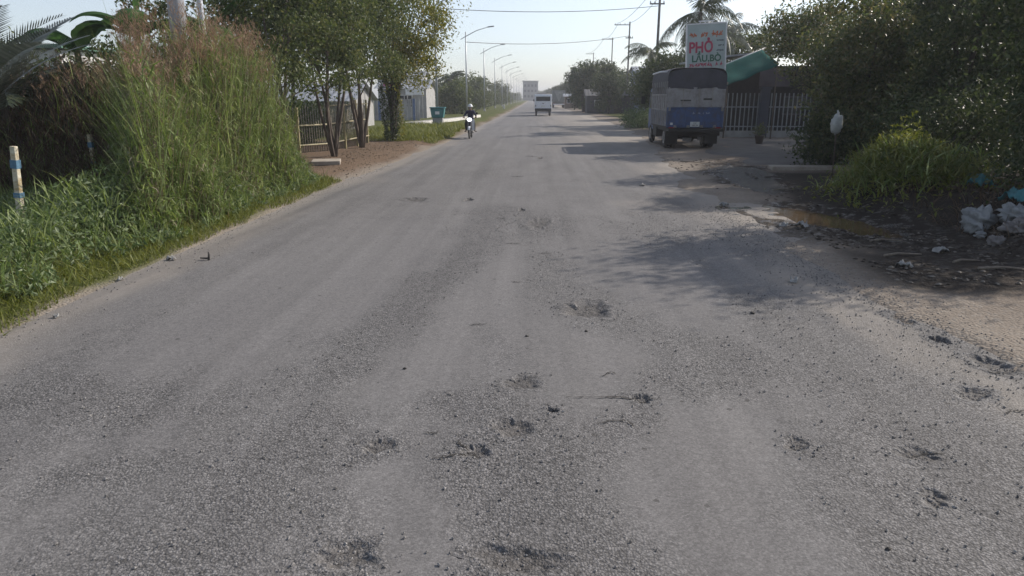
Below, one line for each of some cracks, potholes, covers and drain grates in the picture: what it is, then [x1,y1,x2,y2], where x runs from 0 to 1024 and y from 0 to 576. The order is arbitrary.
pothole [621,391,660,409]
pothole [918,333,960,347]
pothole [476,412,547,444]
pothole [351,434,408,460]
pothole [450,439,501,464]
pothole [450,536,593,576]
pothole [953,350,1024,380]
pothole [551,297,619,321]
pothole [942,383,1005,406]
pothole [294,529,392,576]
pothole [773,430,821,456]
pothole [876,439,960,468]
